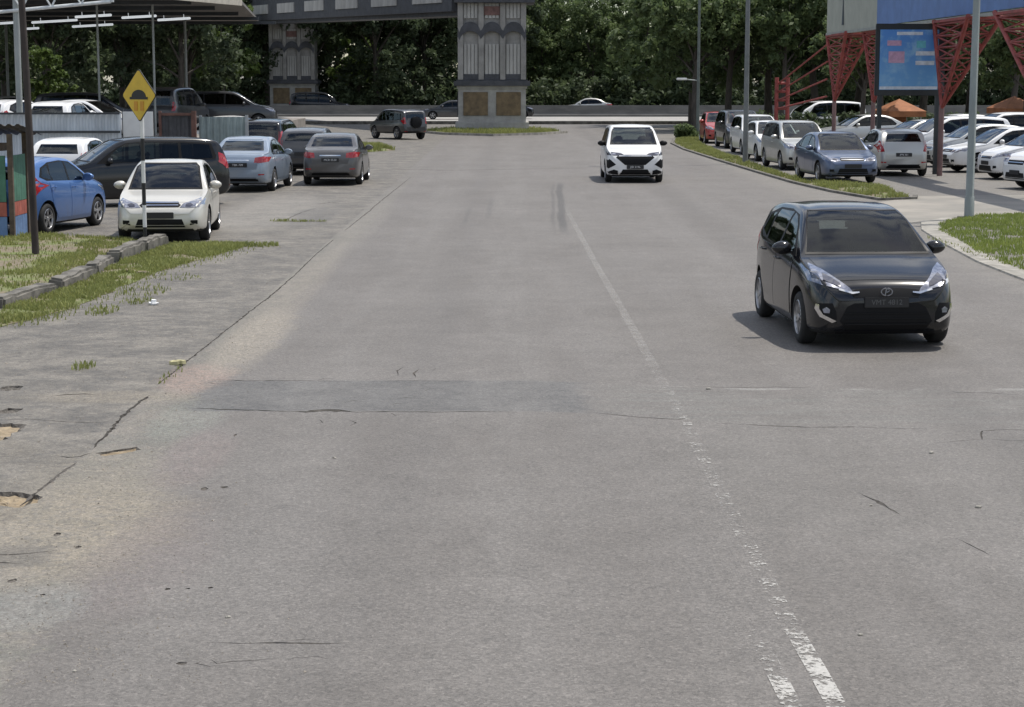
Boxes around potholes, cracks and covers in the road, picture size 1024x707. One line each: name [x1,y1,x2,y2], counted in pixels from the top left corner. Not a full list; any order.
pothole [97,447,141,456]
crack [722,423,1009,443]
crack [862,494,899,514]
crack [195,639,335,666]
pothole [0,423,26,440]
pothole [0,492,42,508]
crack [20,452,93,506]
